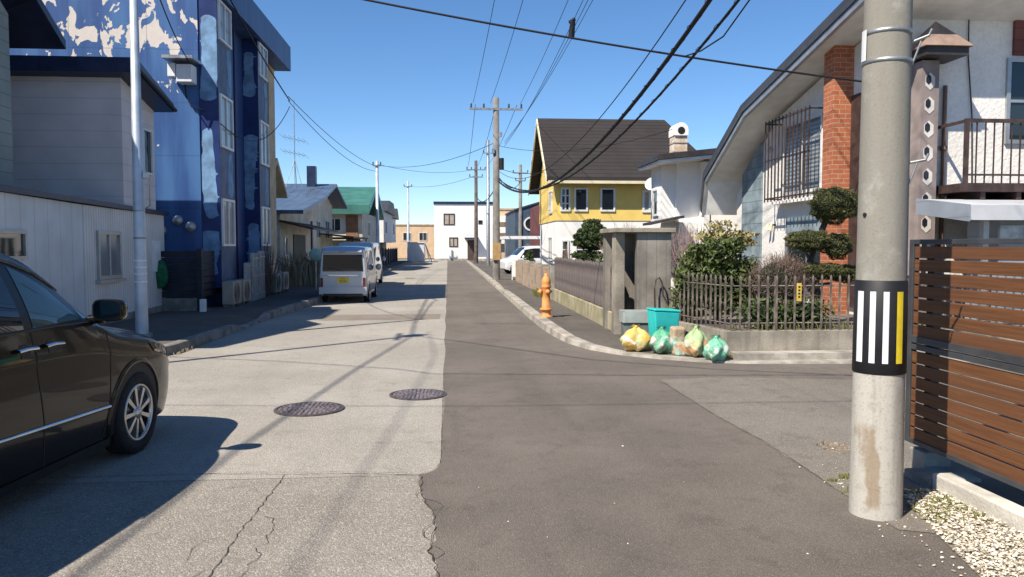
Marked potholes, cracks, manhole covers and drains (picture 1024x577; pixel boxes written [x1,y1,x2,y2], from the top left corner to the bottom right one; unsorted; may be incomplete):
manhole cover [274,401,344,417]
crack [187,476,283,577]
manhole cover [389,389,447,401]
